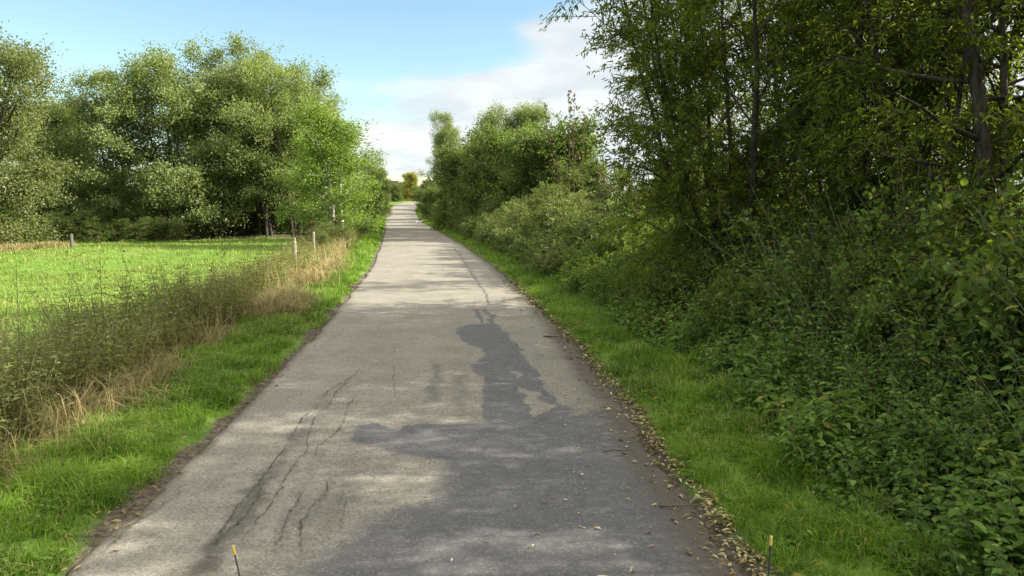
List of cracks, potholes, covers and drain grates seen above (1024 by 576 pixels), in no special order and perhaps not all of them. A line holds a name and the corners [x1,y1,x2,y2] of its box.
crack [206,371,357,572]
